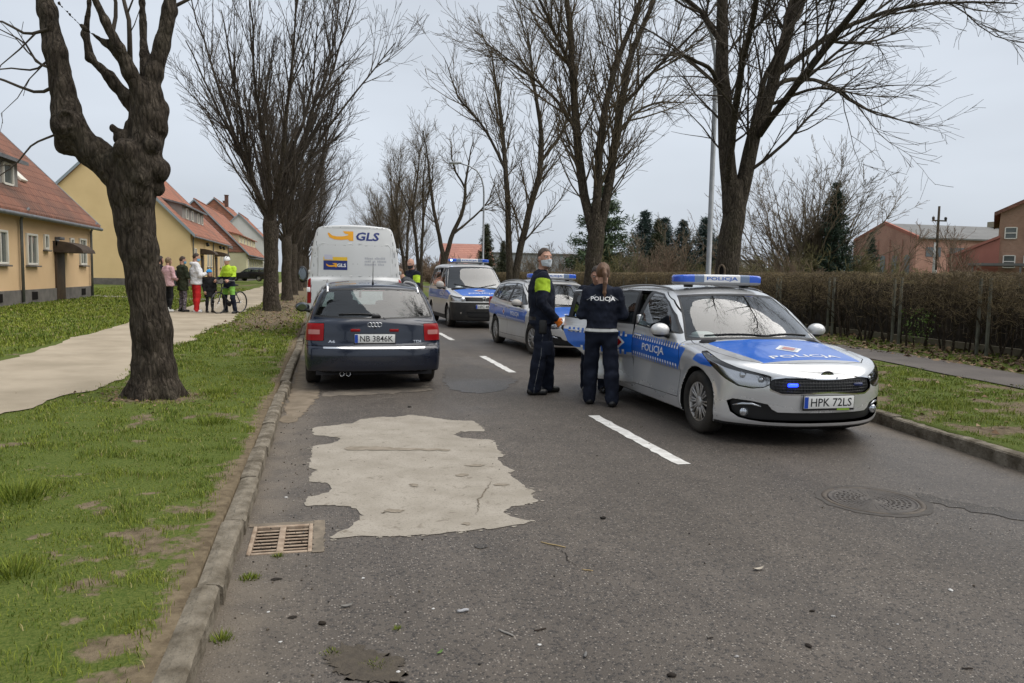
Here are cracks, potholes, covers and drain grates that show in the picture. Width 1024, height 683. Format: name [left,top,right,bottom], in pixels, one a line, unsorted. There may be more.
manhole cover [814,485,934,518]
drain grate [246,523,313,556]
